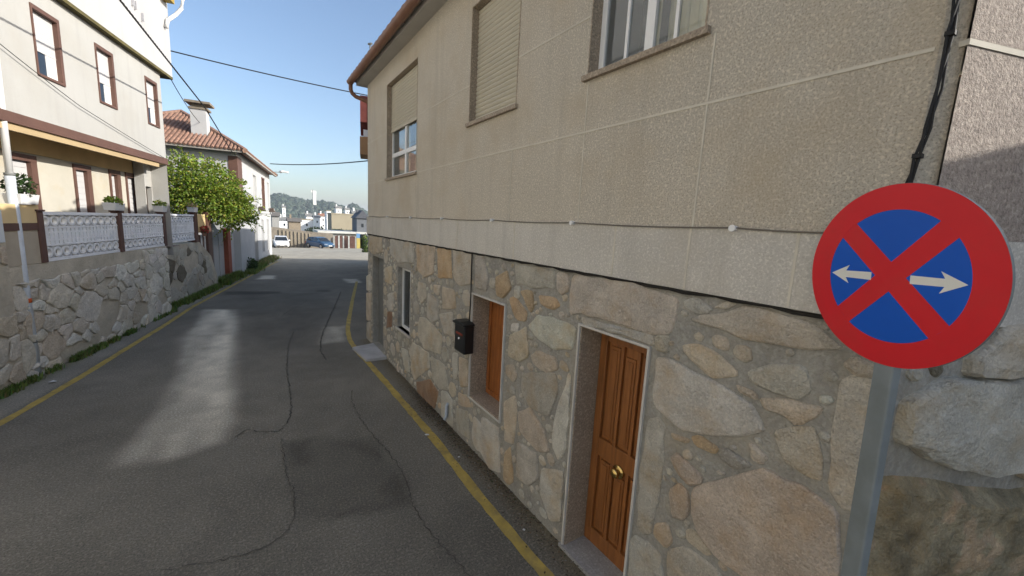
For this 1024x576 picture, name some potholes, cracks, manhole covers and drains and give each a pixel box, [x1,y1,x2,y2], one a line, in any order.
crack [160,301,306,573]
